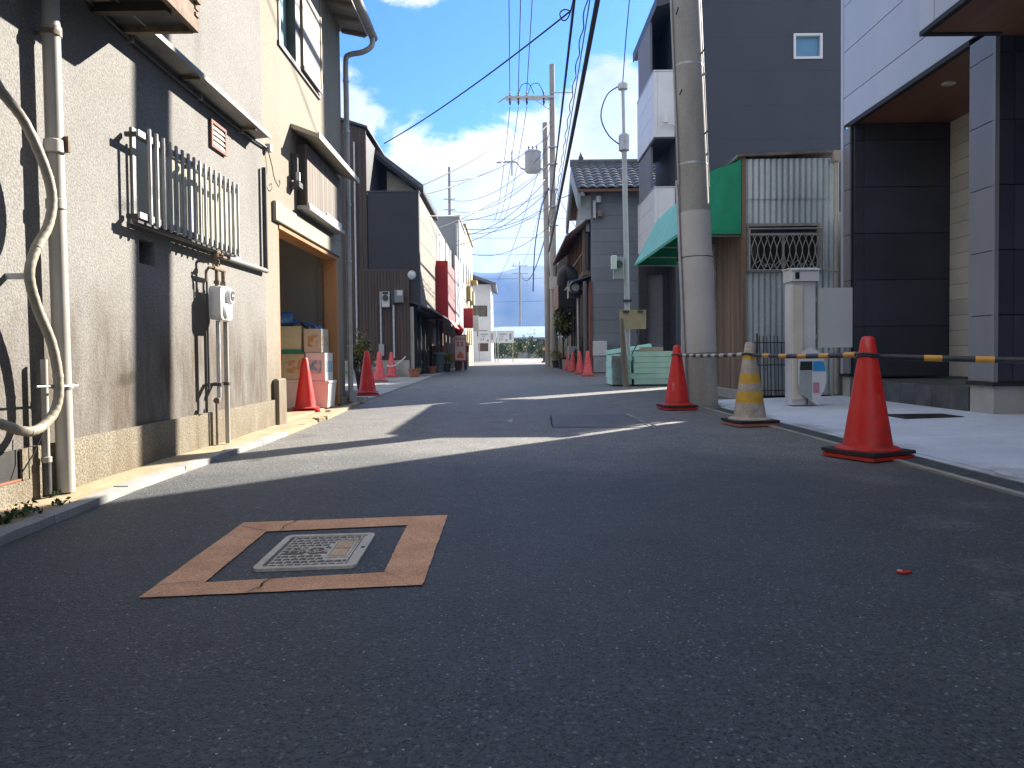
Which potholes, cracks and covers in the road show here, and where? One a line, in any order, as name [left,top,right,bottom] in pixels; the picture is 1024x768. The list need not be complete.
manhole cover [253,533,375,572]
